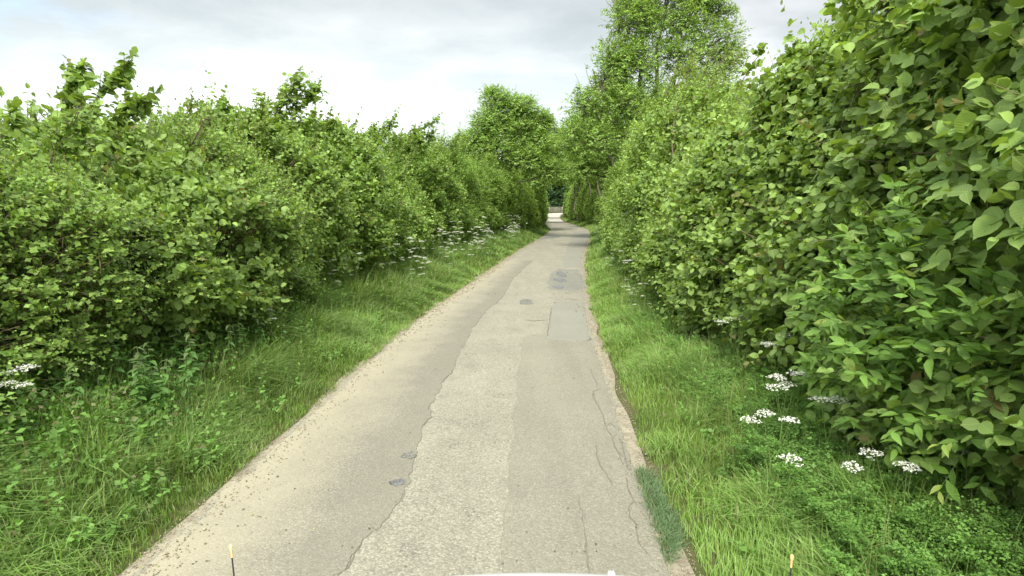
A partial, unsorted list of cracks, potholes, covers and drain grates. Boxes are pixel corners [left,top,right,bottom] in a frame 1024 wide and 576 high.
crack [578,499,590,574]
crack [590,369,649,555]
